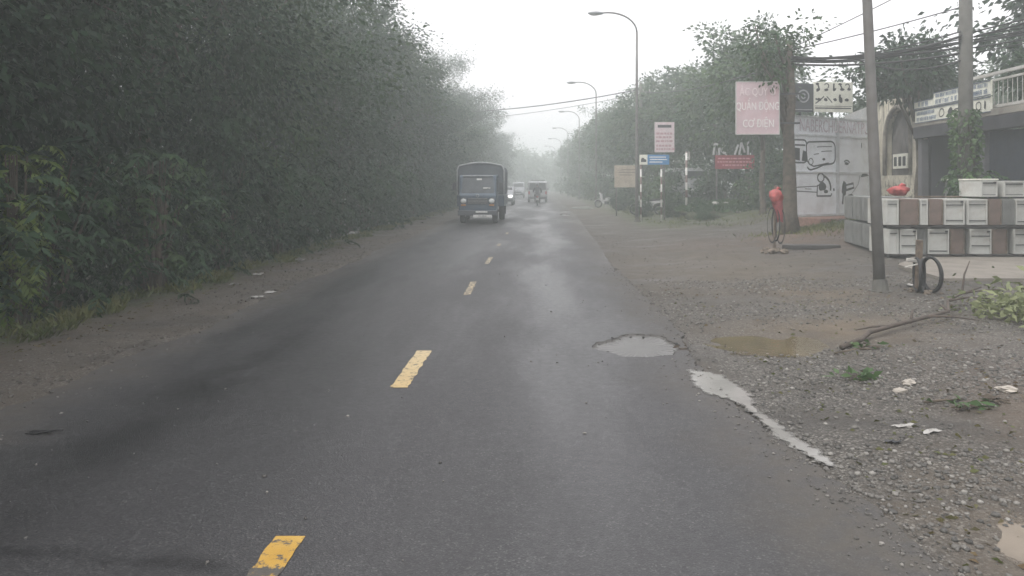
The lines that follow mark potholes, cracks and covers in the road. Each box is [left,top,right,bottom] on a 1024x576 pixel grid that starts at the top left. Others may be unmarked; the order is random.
pothole [592,334,681,357]
